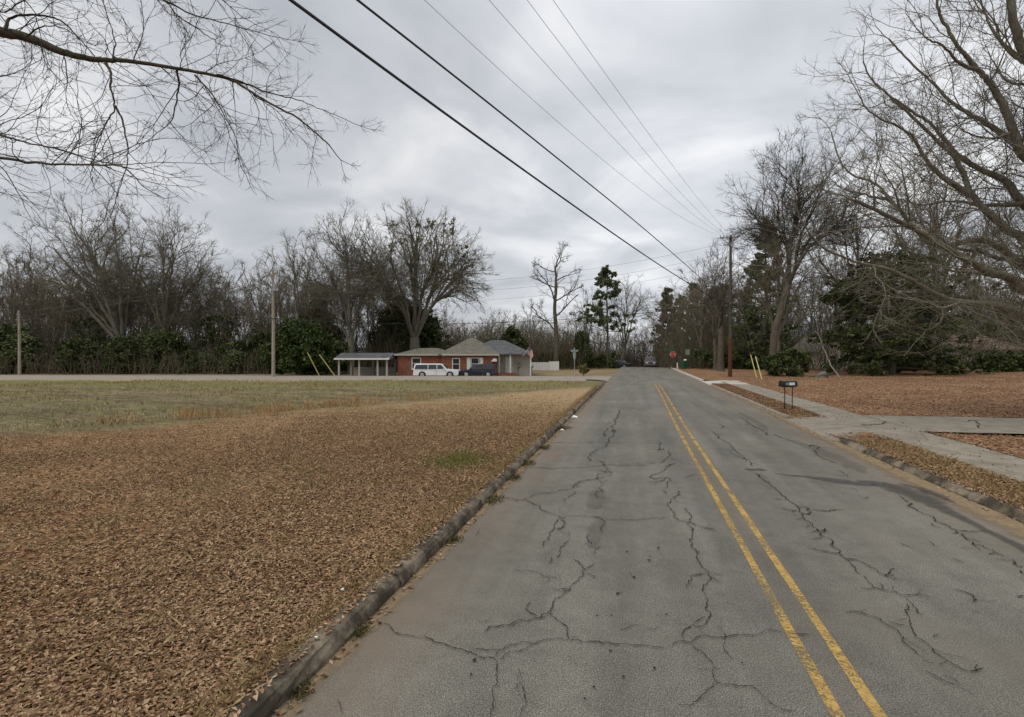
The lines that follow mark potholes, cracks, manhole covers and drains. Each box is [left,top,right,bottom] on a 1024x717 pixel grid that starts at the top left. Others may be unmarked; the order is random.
crack [713,417,982,695]
crack [384,409,808,716]
crack [900,497,1024,597]
